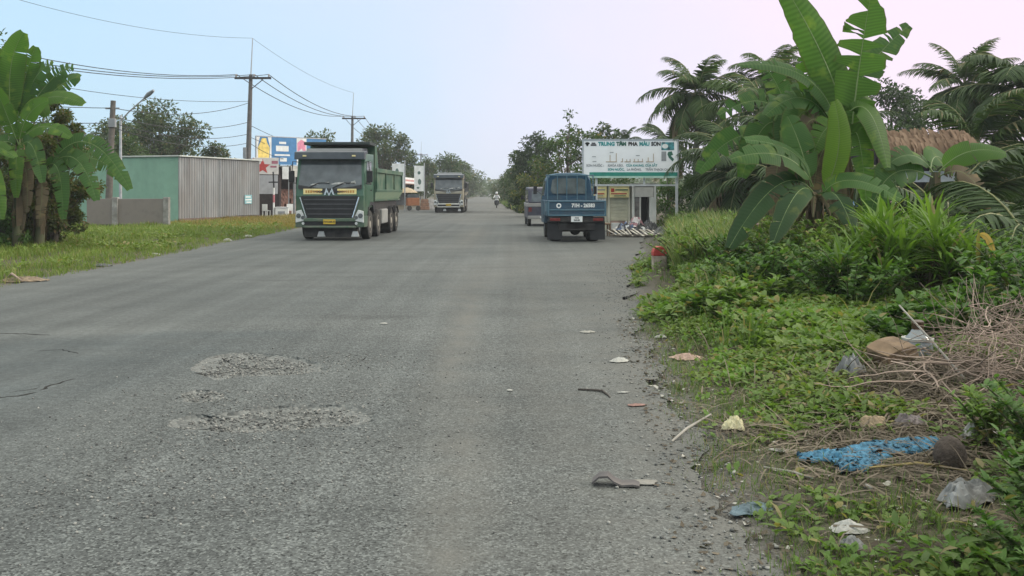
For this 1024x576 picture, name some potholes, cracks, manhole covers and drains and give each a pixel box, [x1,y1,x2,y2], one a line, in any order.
pothole [167,404,377,433]
pothole [181,389,230,403]
pothole [191,352,327,381]
crack [0,379,72,398]
